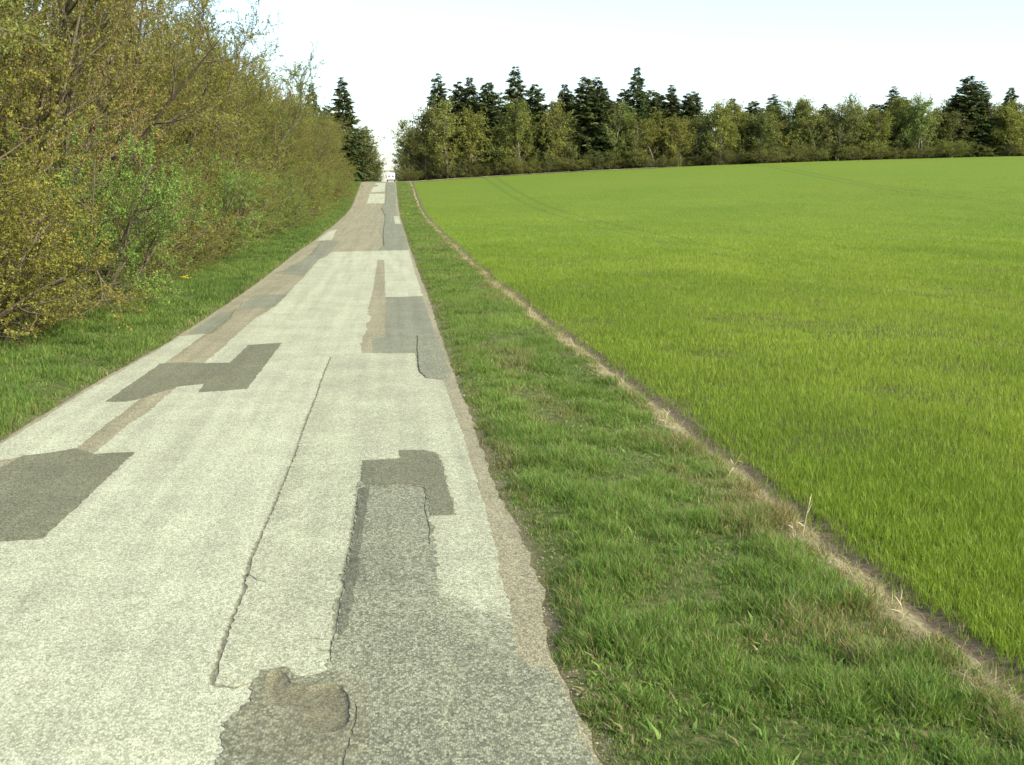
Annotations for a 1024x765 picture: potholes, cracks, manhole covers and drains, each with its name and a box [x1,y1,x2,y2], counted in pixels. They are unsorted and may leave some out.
crack [209,357,430,689]
crack [415,336,426,378]
pothole [264,672,351,734]
